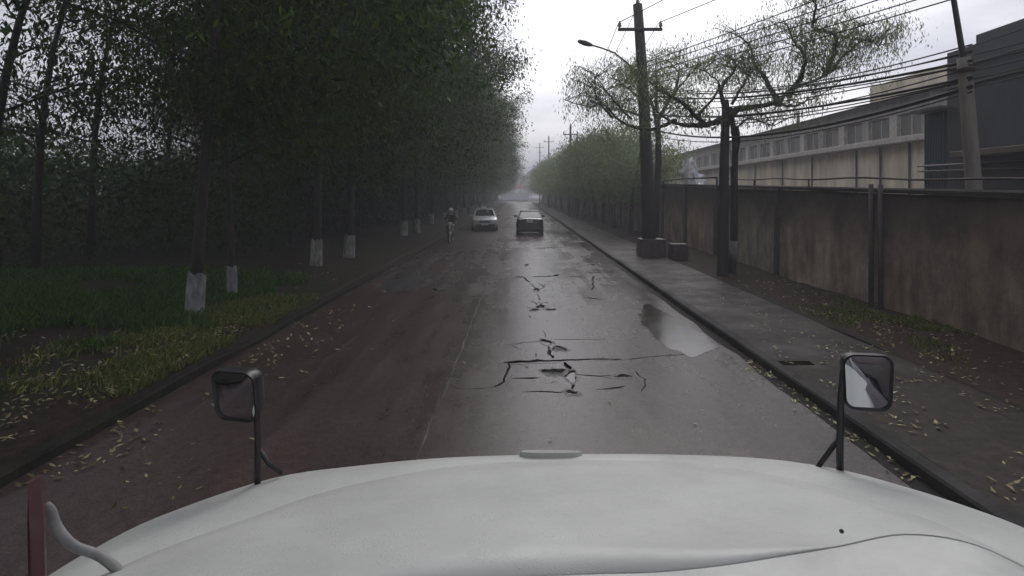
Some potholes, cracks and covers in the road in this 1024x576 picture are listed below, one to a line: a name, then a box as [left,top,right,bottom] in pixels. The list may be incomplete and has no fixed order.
pothole [562,369,579,385]
pothole [561,389,582,397]
pothole [538,367,569,377]
crack [452,264,685,393]
